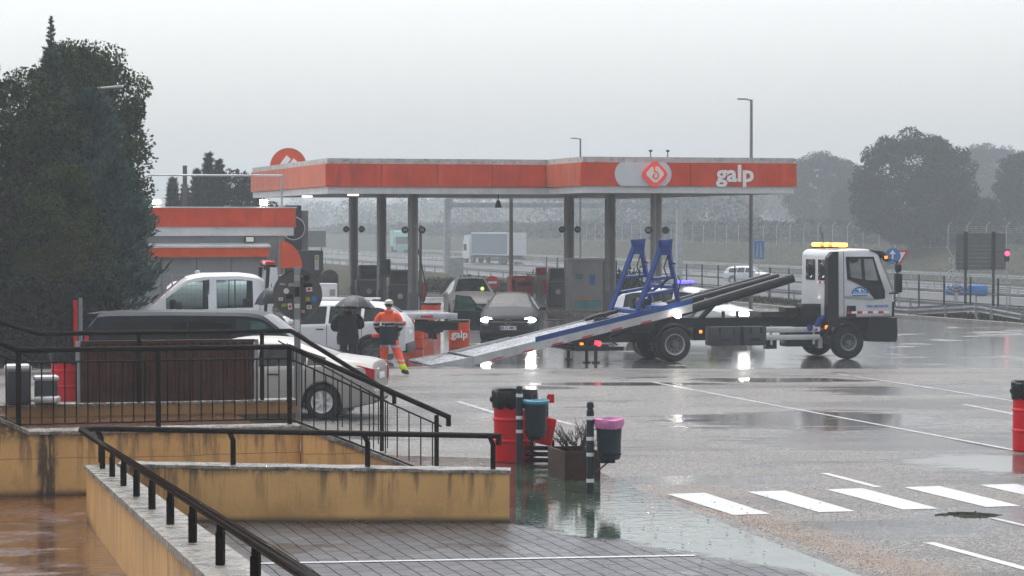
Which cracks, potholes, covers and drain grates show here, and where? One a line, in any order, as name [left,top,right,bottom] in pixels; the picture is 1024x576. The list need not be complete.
pothole [935,511,1002,519]
